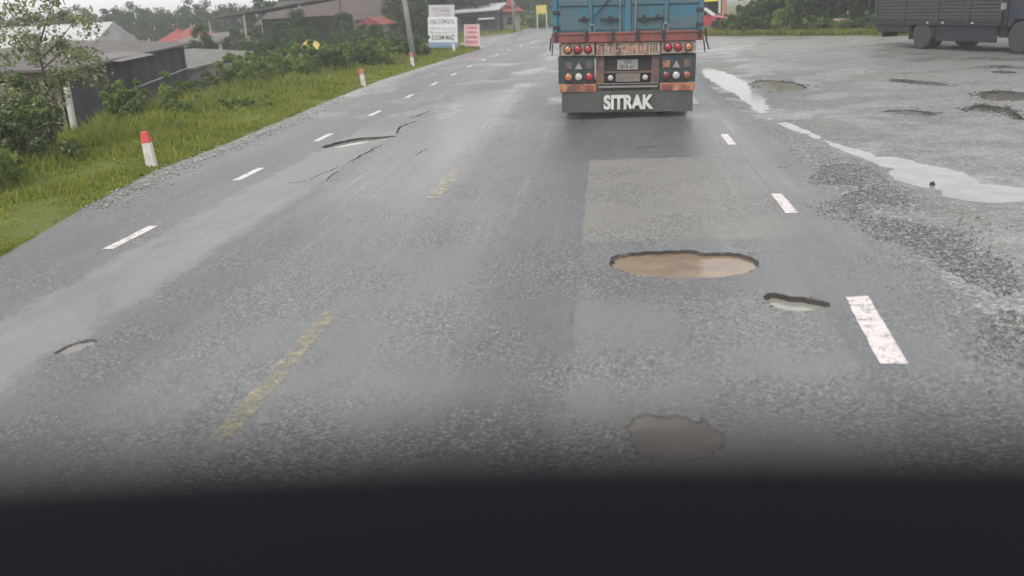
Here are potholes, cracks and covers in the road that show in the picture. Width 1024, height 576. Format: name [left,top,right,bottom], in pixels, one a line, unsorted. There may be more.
pothole [609,250,759,278]
crack [292,110,432,183]
pothole [54,339,98,354]
pothole [961,104,1024,120]
pothole [623,413,716,431]
pothole [976,90,1024,101]
pothole [754,80,807,92]
pothole [763,293,830,311]
